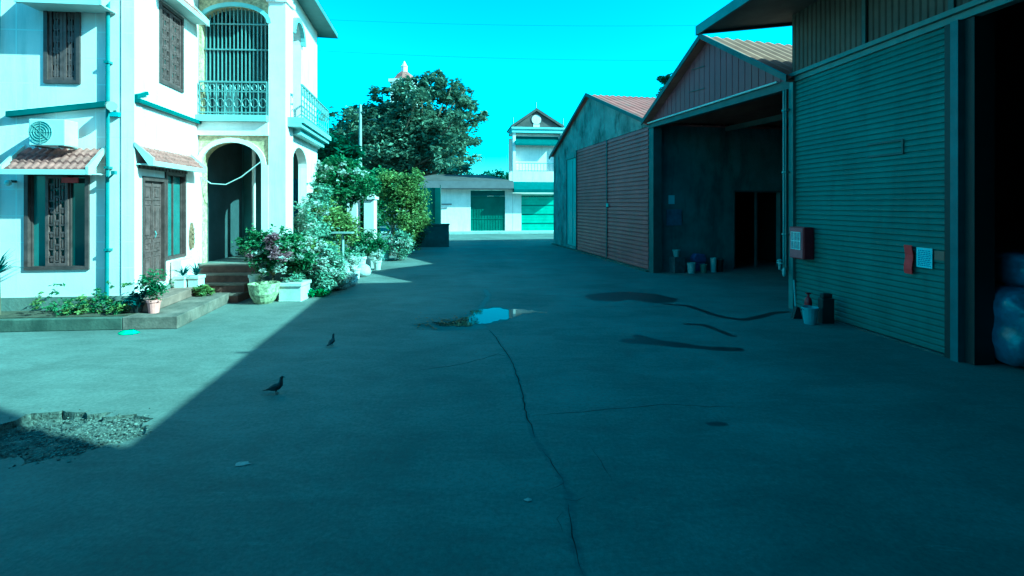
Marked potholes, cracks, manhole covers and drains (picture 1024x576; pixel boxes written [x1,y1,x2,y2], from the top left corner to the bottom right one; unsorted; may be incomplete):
crack [423,330,733,571]
pothole [0,406,159,469]
